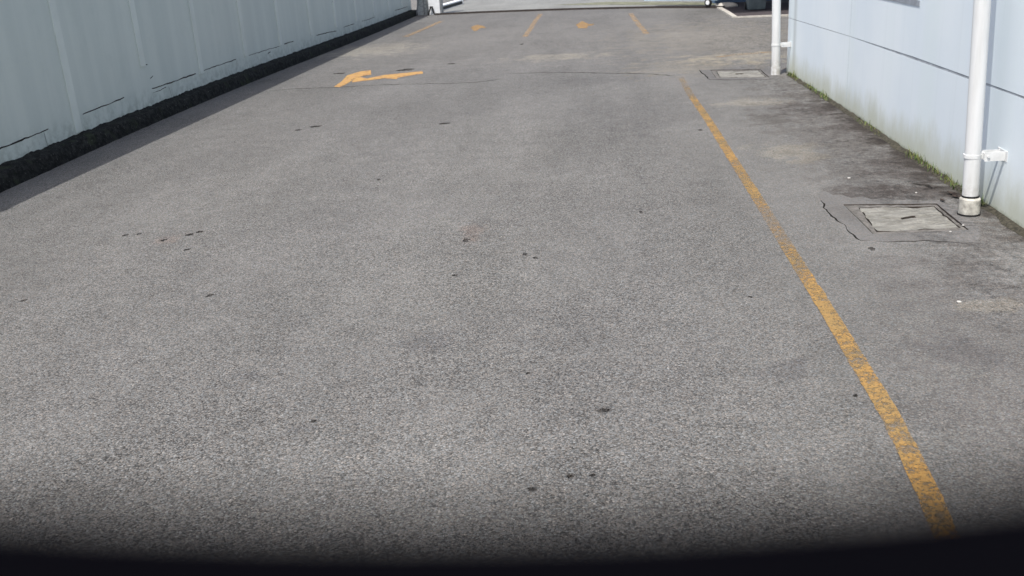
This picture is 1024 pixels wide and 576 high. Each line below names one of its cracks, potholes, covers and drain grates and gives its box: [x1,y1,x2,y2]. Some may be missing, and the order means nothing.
crack [821,201,974,243]
manhole cover [711,69,768,78]
manhole cover [843,204,969,234]
